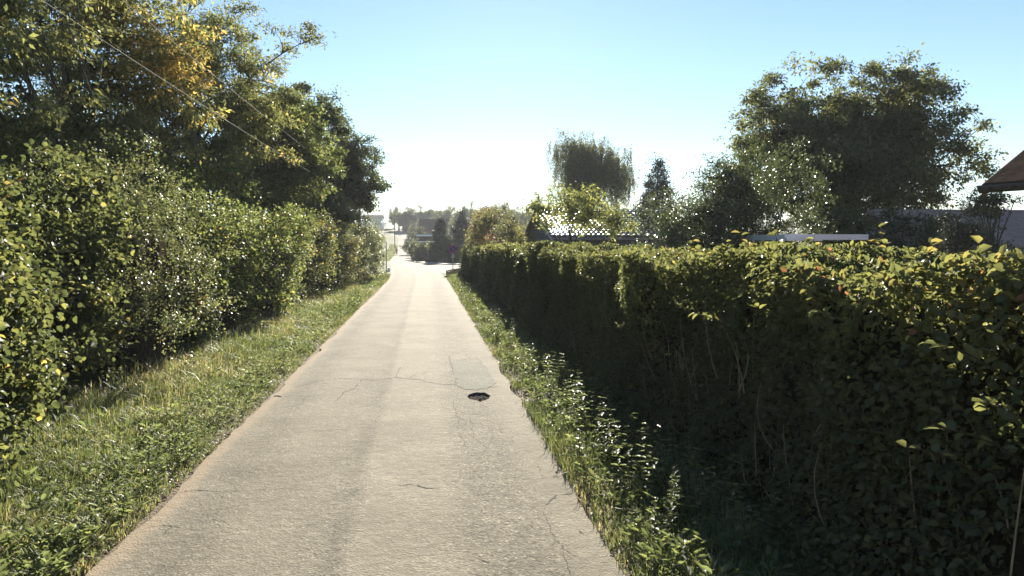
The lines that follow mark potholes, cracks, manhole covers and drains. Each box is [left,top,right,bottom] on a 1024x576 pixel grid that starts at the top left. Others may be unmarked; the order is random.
pothole [467,392,490,402]
crack [536,469,584,573]
crack [298,357,526,458]
